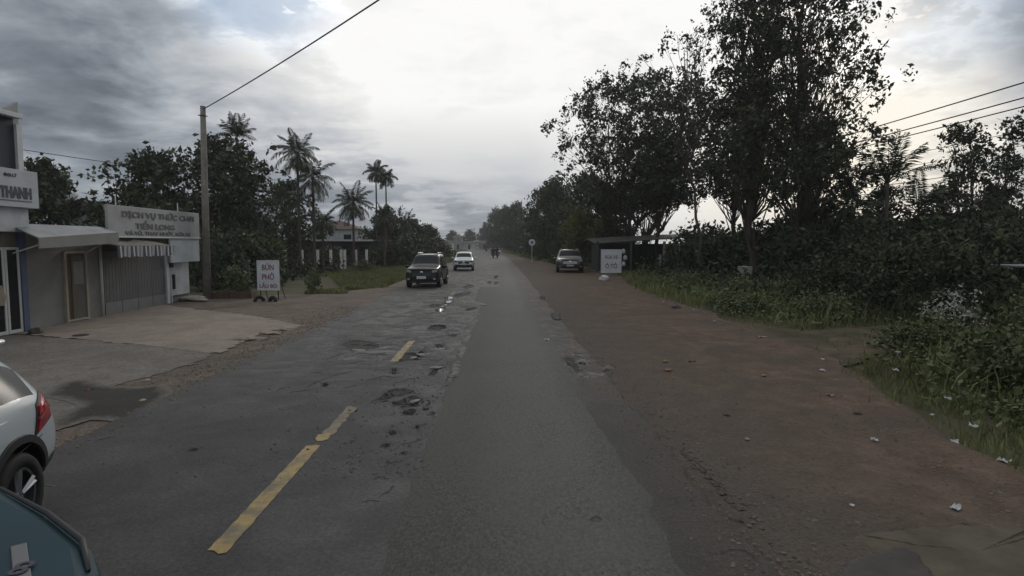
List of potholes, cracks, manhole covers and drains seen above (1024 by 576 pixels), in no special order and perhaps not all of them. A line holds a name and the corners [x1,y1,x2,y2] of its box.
pothole [399,408,418,416]
pothole [372,388,418,403]
pothole [389,395,429,411]
pothole [564,357,580,374]
pothole [339,340,384,350]
crack [361,460,404,503]
